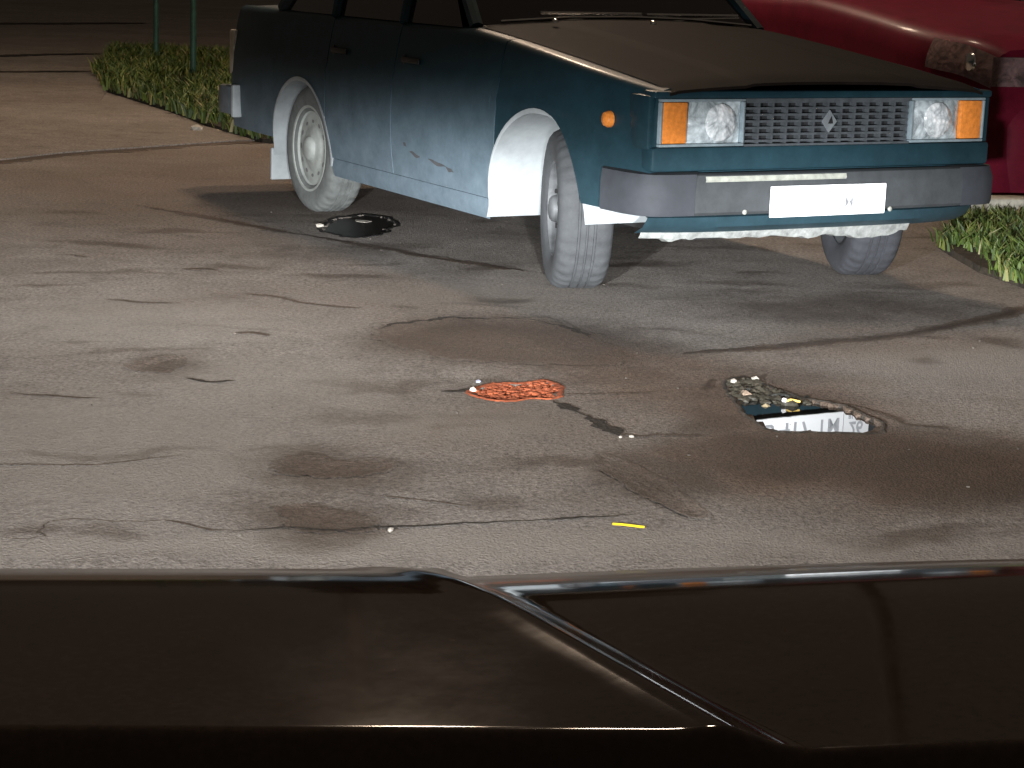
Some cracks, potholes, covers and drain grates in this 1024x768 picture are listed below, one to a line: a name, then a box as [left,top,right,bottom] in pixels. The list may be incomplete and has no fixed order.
pothole [317,213,401,238]
crack [240,492,640,532]
crack [553,391,703,437]
pothole [722,376,887,435]
crack [13,518,221,539]
